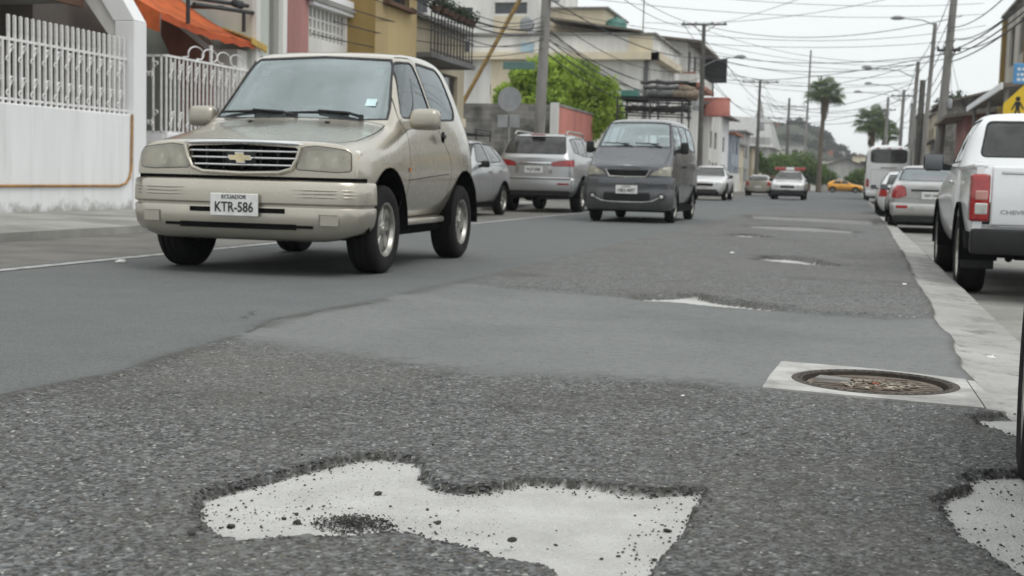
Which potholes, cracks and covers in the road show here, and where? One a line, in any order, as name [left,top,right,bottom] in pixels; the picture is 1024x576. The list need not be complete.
pothole [197,451,710,576]
pothole [932,469,1024,576]
pothole [755,255,848,266]
pothole [632,293,786,312]
manhole cover [792,369,960,395]
